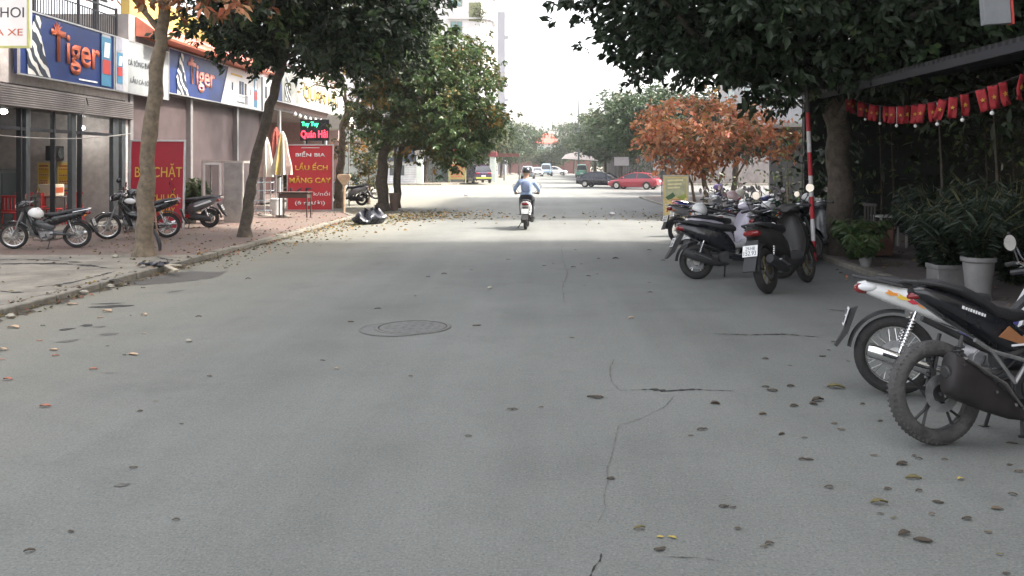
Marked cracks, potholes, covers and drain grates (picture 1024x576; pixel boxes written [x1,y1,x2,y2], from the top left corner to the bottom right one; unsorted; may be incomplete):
crack [519,246,568,302]
manhole cover [374,320,452,335]
crack [598,388,731,521]
